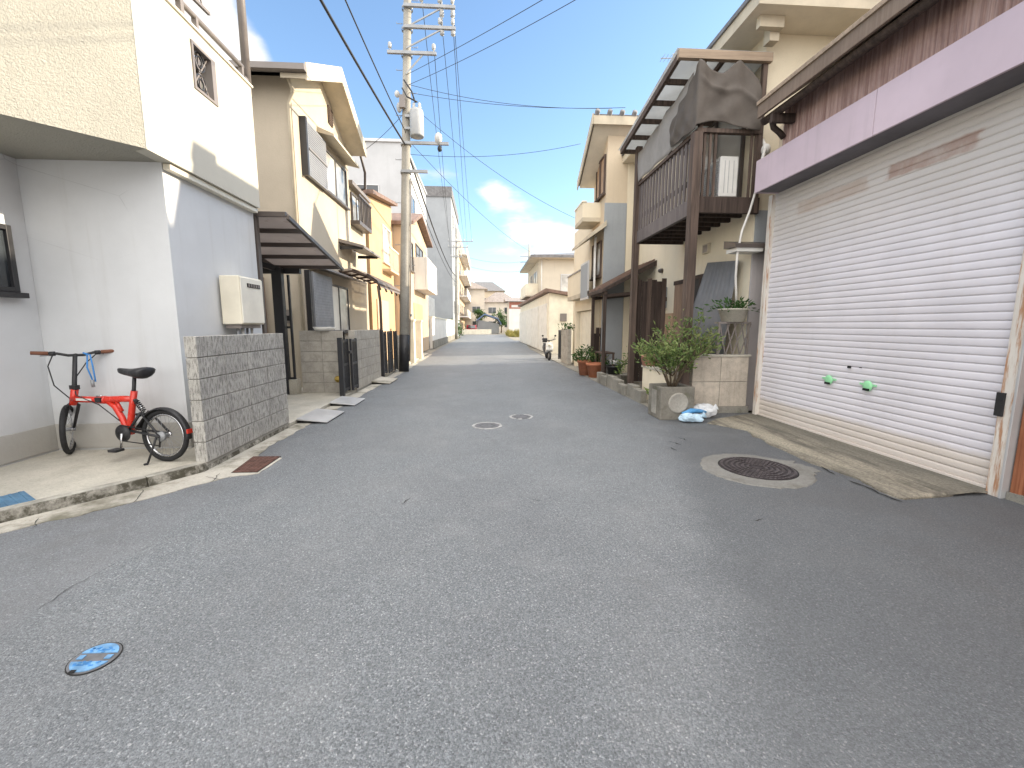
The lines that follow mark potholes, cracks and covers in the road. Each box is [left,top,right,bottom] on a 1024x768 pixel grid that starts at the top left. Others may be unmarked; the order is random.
manhole cover [700,453,821,489]
manhole cover [65,642,123,676]
